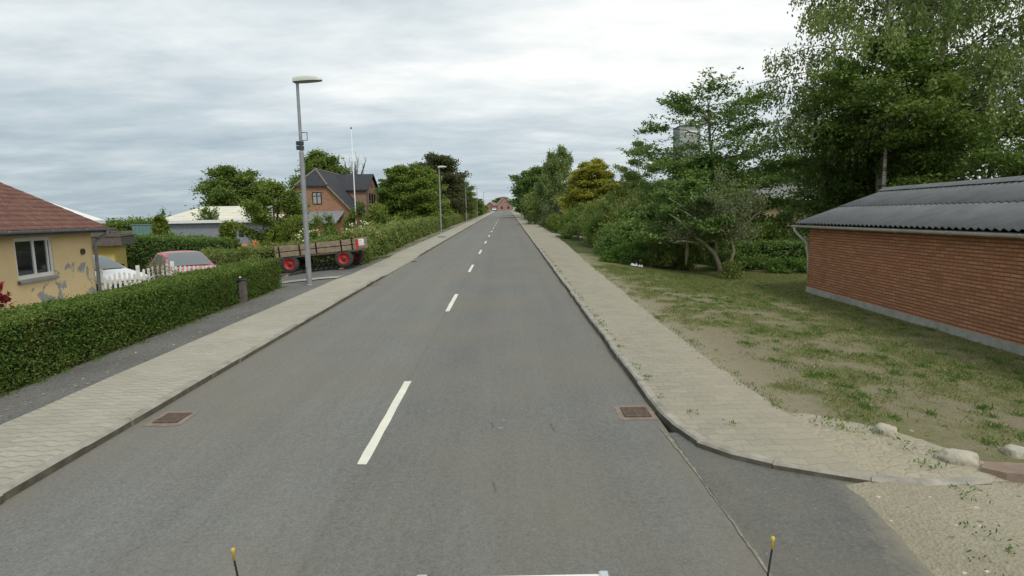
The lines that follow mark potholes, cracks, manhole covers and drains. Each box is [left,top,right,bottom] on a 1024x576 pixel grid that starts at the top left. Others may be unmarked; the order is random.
drain grate [613,405,658,420]
drain grate [142,411,199,427]
